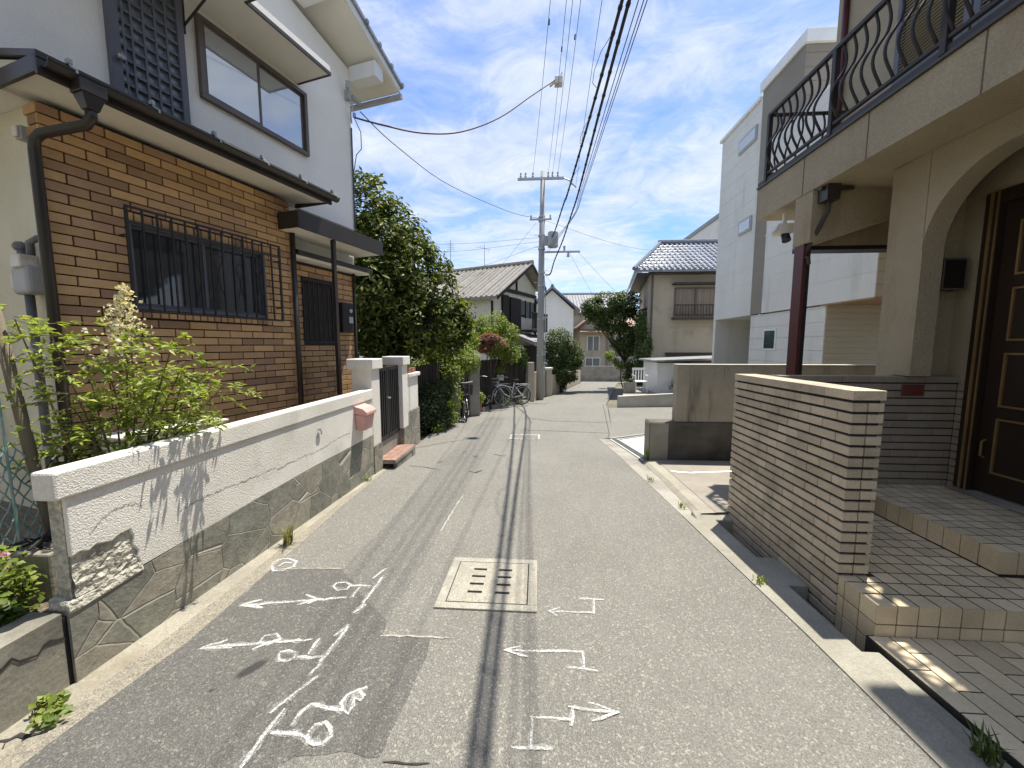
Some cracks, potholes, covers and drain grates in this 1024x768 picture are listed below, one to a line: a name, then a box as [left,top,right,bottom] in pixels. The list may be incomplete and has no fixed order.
manhole cover [434,557,537,613]
